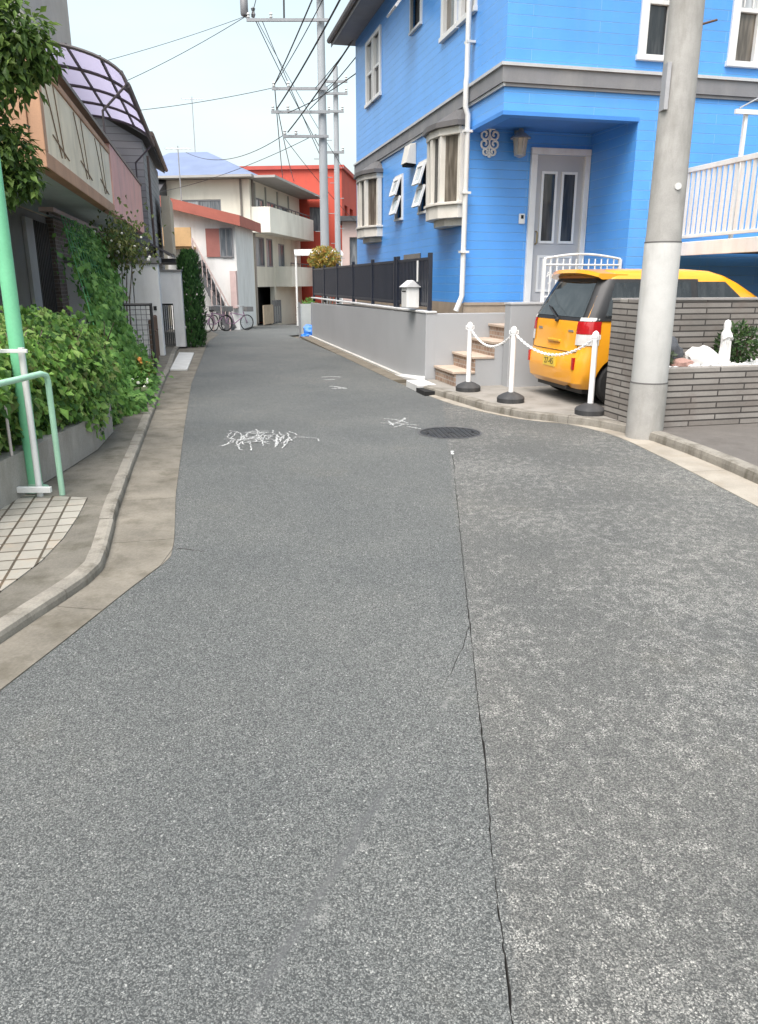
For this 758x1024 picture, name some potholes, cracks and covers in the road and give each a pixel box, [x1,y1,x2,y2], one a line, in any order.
manhole cover [418,427,482,439]
crack [441,455,514,1024]
